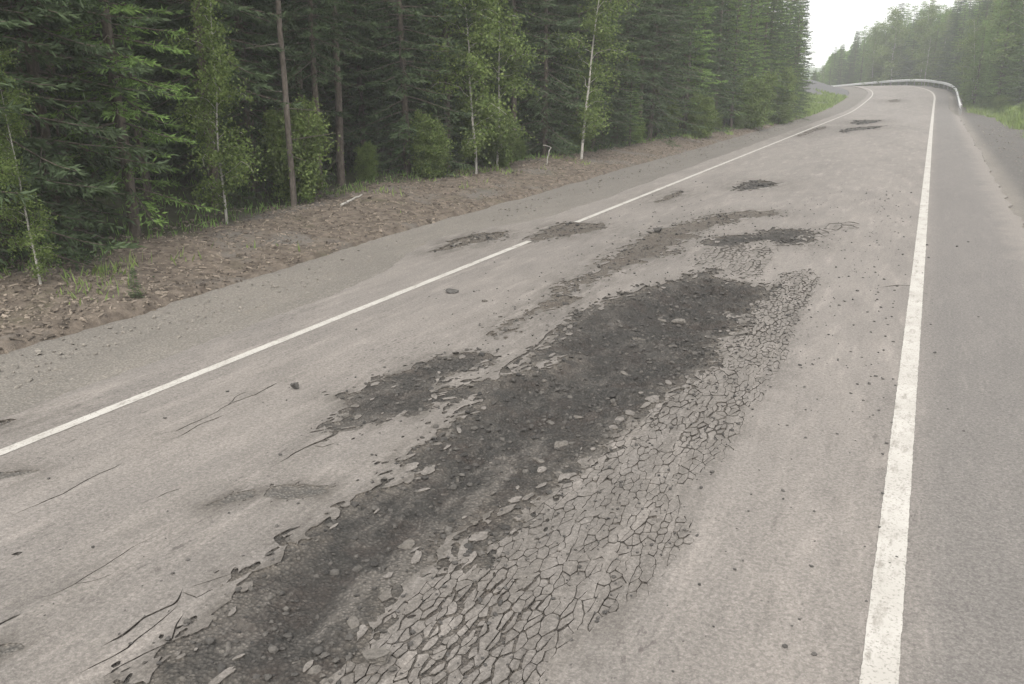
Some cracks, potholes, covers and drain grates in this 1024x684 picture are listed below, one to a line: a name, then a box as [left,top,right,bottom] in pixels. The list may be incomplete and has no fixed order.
pothole [111,266,794,684]
pothole [732,179,782,191]
crack [18,462,124,513]
pothole [695,227,818,250]
crack [281,432,338,462]
pothole [481,209,783,340]
crack [336,245,820,684]
crack [166,374,300,439]
pothole [655,191,684,203]
pothole [840,125,887,133]
crack [25,540,230,677]
pothole [428,230,510,253]
